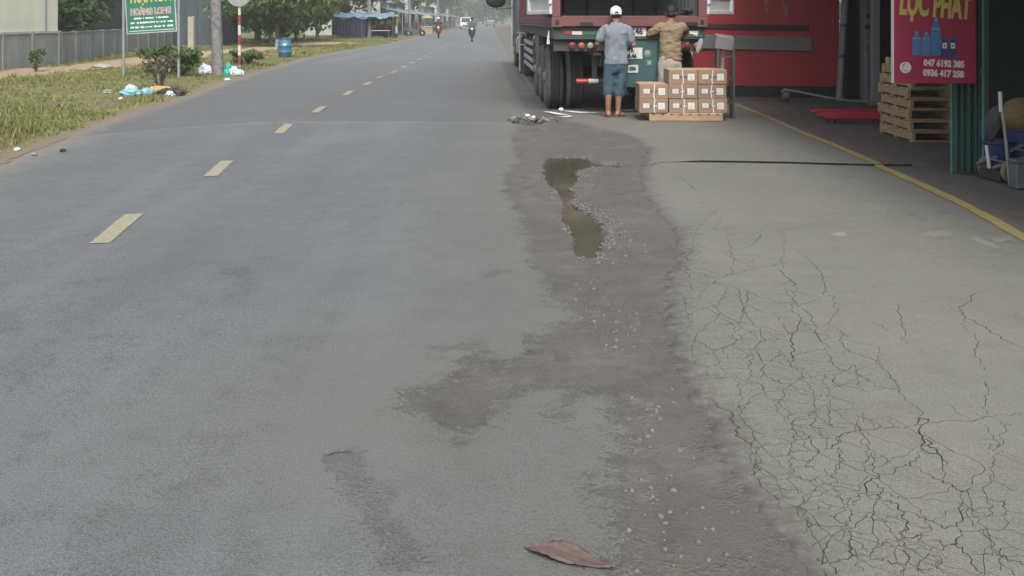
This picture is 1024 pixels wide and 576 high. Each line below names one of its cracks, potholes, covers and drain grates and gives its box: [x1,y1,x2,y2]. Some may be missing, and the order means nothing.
pothole [541,156,628,255]
crack [675,205,1024,576]
